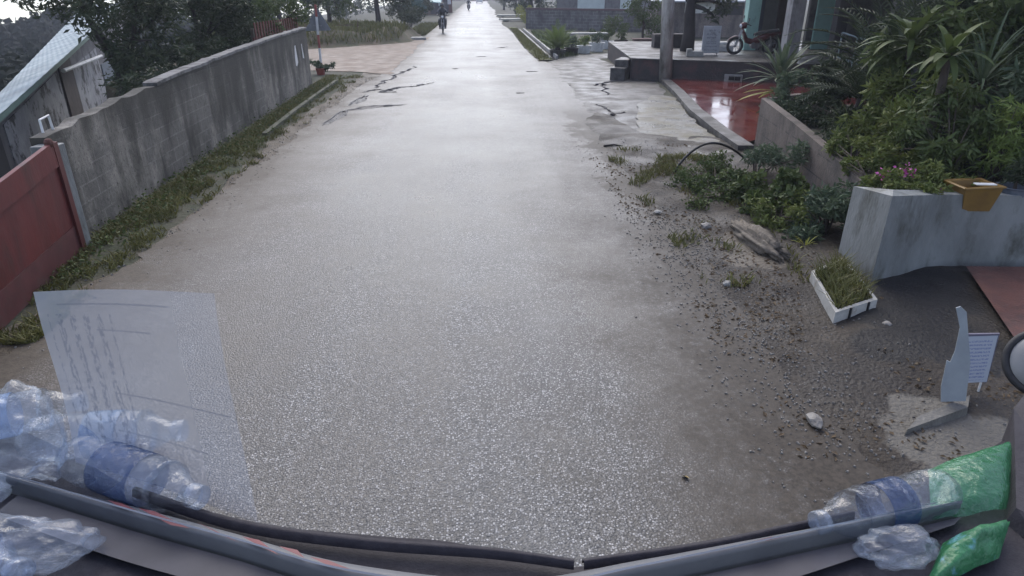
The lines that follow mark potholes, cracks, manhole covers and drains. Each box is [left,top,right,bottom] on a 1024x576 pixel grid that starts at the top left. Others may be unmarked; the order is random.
crack [593,81,626,119]
crack [366,66,430,93]
